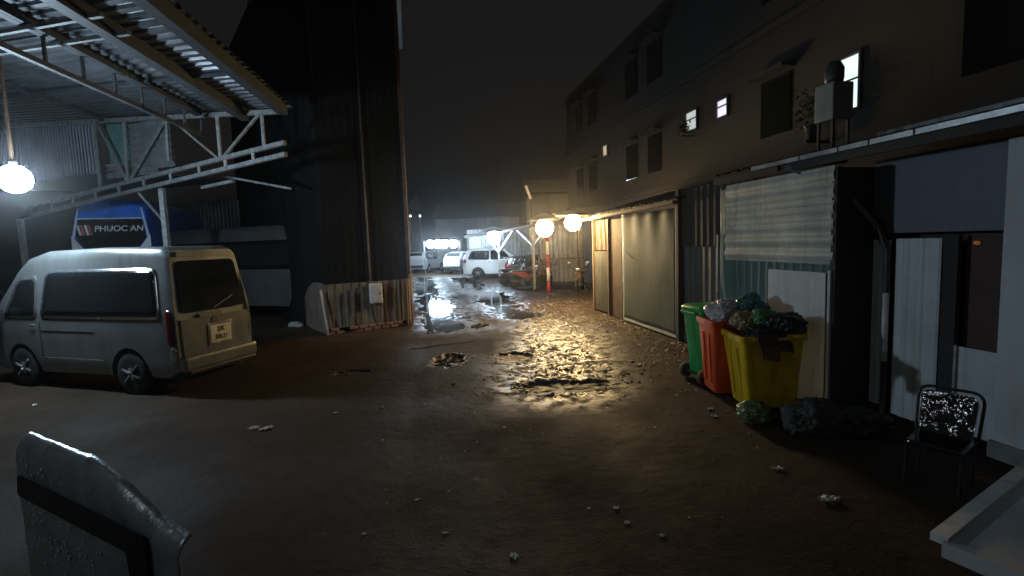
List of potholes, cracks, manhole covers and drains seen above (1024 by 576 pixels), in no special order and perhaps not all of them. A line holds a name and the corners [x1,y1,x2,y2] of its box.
pothole [491,351,537,364]
pothole [425,352,467,369]
pothole [513,378,623,397]
